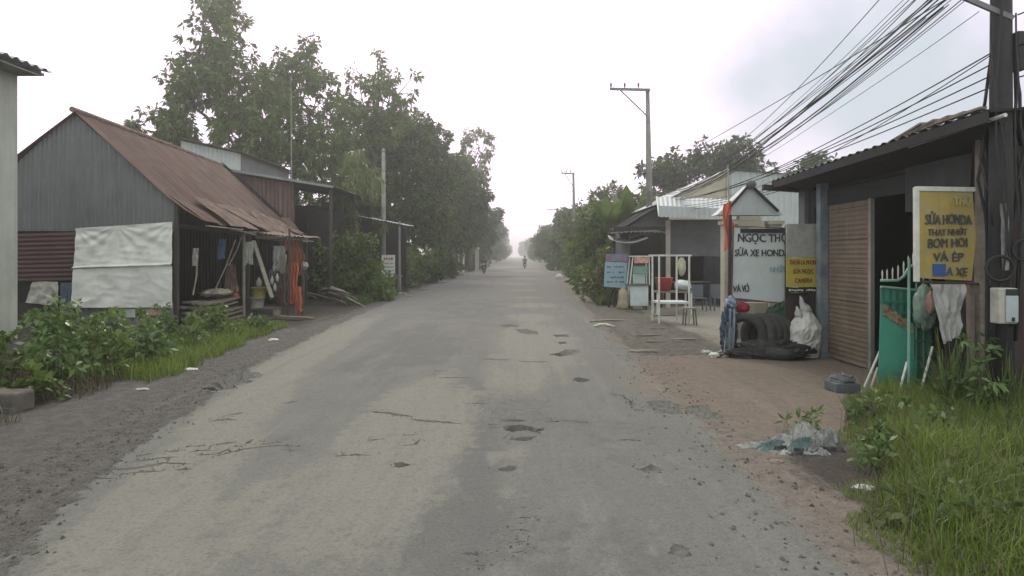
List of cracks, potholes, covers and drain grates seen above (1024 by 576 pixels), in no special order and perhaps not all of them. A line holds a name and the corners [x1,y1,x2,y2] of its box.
crack [212,401,297,421]
pothole [684,405,724,421]
crack [84,439,297,480]
pothole [487,399,560,445]
pothole [549,349,580,357]
crack [337,411,463,456]
pothole [639,464,663,473]
pothole [668,544,693,558]
pothole [646,400,683,414]
